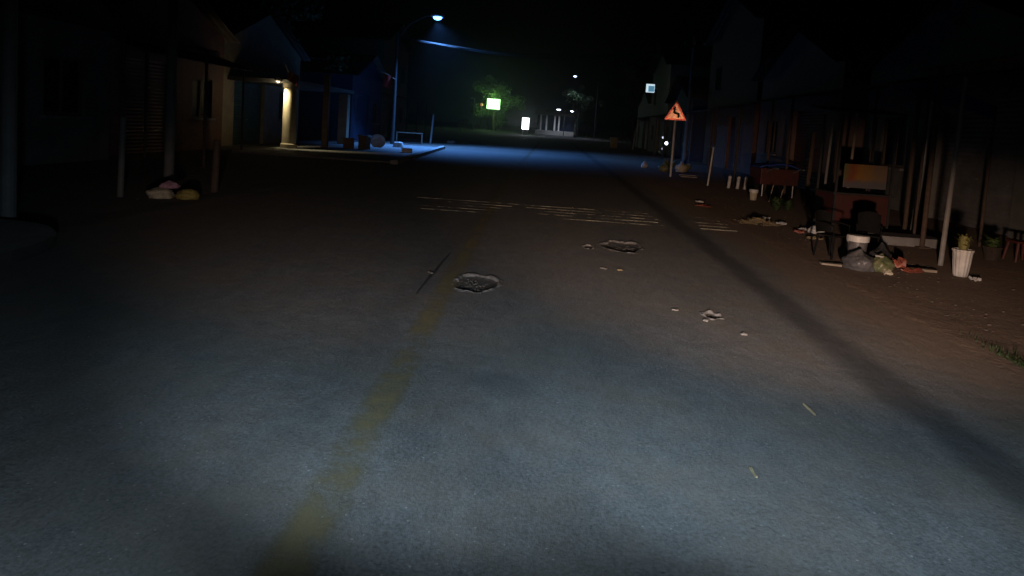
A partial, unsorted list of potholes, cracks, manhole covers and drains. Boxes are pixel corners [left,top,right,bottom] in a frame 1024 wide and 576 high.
crack [416,253,450,295]
pothole [699,310,725,320]
pothole [451,273,503,294]
pothole [597,240,646,254]
